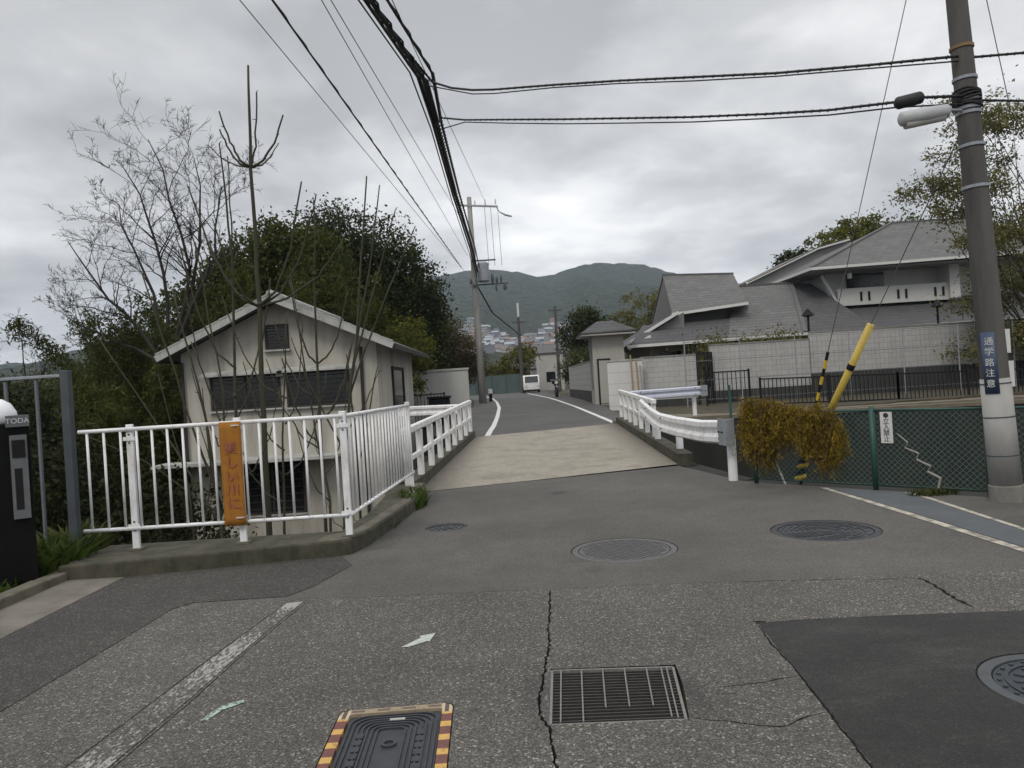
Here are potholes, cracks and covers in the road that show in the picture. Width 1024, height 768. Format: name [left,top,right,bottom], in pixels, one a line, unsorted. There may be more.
crack [875,578,974,608]
manhole cover [426,523,467,531]
crack [537,590,560,768]
manhole cover [571,538,678,562]
drain grate [549,666,688,725]
manhole cover [770,520,883,541]
manhole cover [315,703,454,768]
manhole cover [975,654,1024,704]
crack [724,676,796,687]
crack [694,712,823,727]
